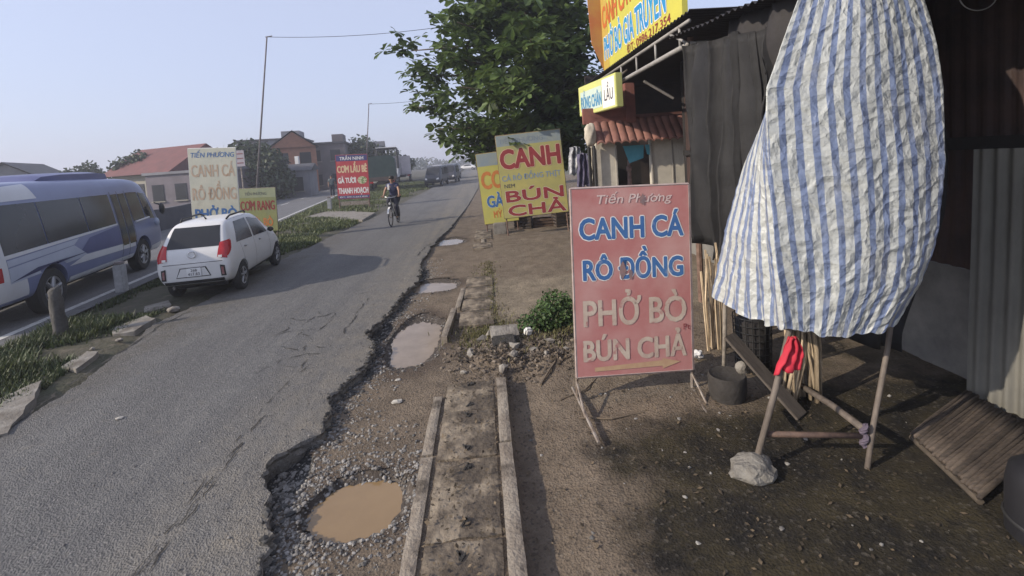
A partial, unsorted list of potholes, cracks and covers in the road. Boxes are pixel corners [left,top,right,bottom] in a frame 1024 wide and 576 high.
crack [129,298,368,576]
pothole [295,463,418,549]
pothole [415,278,462,294]
pothole [436,237,467,246]
pothole [382,312,452,373]
